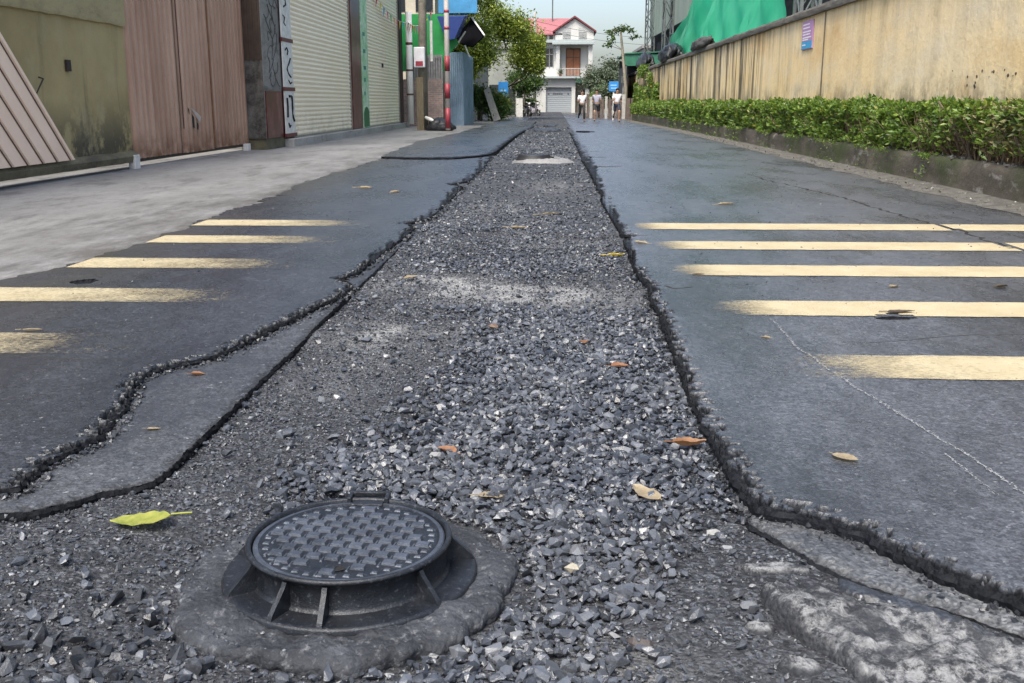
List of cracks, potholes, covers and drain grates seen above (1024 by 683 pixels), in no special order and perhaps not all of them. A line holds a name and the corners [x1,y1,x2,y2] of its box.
manhole cover [512,153,575,164]
crack [765,315,1024,494]
manhole cover [170,490,521,681]
